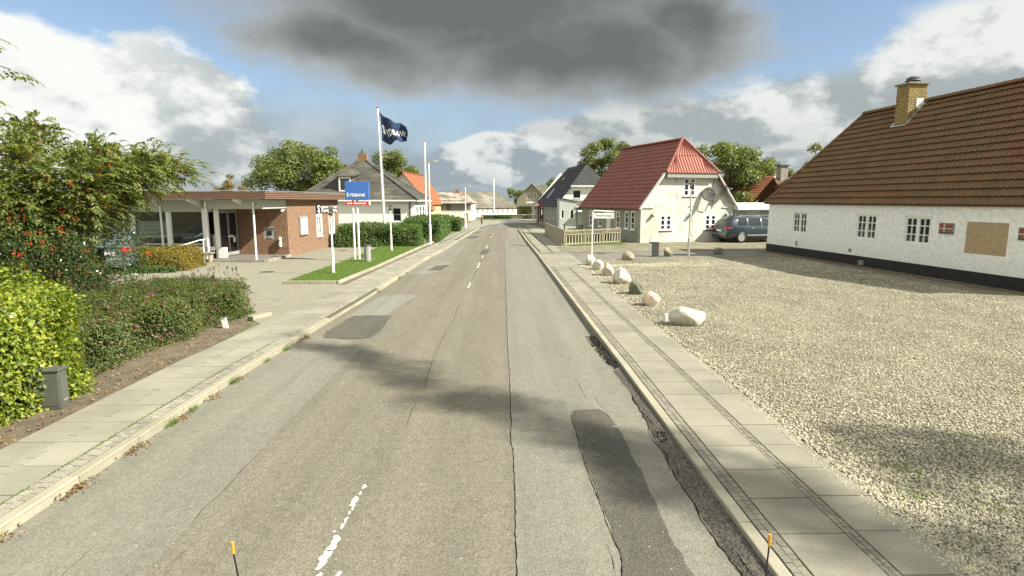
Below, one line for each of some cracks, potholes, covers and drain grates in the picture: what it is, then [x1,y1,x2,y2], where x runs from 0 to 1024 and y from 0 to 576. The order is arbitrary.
pothole [653,430,668,443]
pothole [585,336,621,371]
crack [193,455,258,521]
